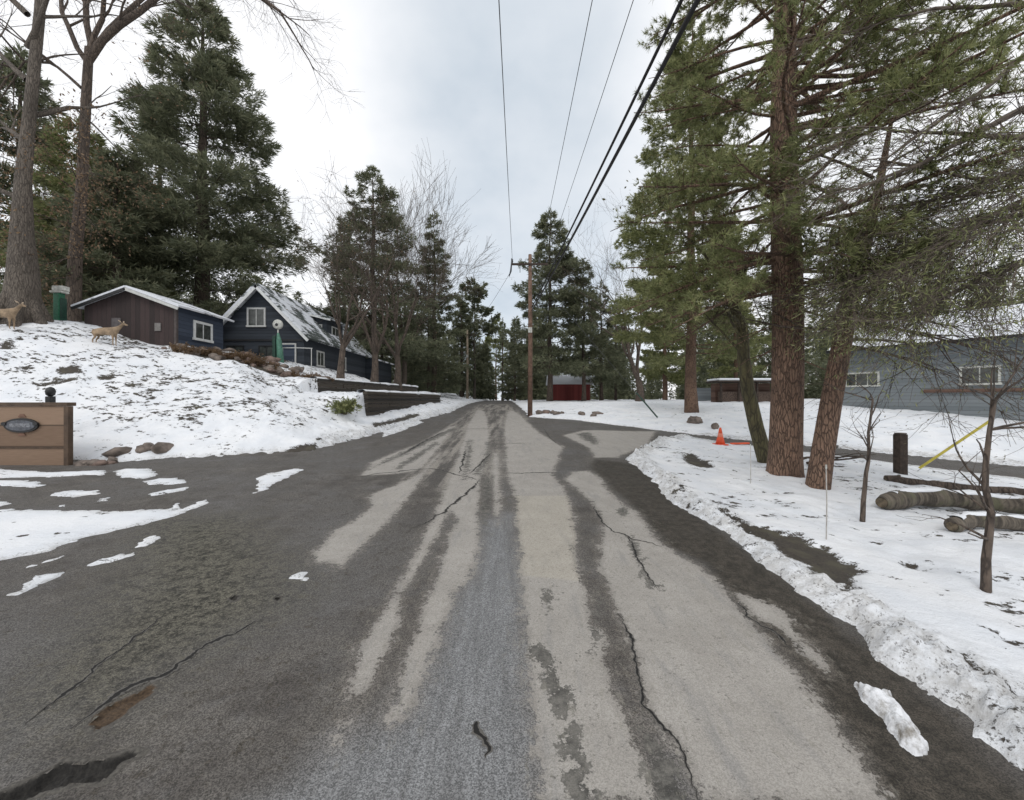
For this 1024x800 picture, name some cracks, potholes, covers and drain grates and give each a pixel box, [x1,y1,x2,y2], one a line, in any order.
crack [738,601,791,649]
crack [361,430,492,530]
crack [618,614,698,800]
crack [593,506,662,588]
crack [25,613,264,729]
pothole [0,746,150,800]
